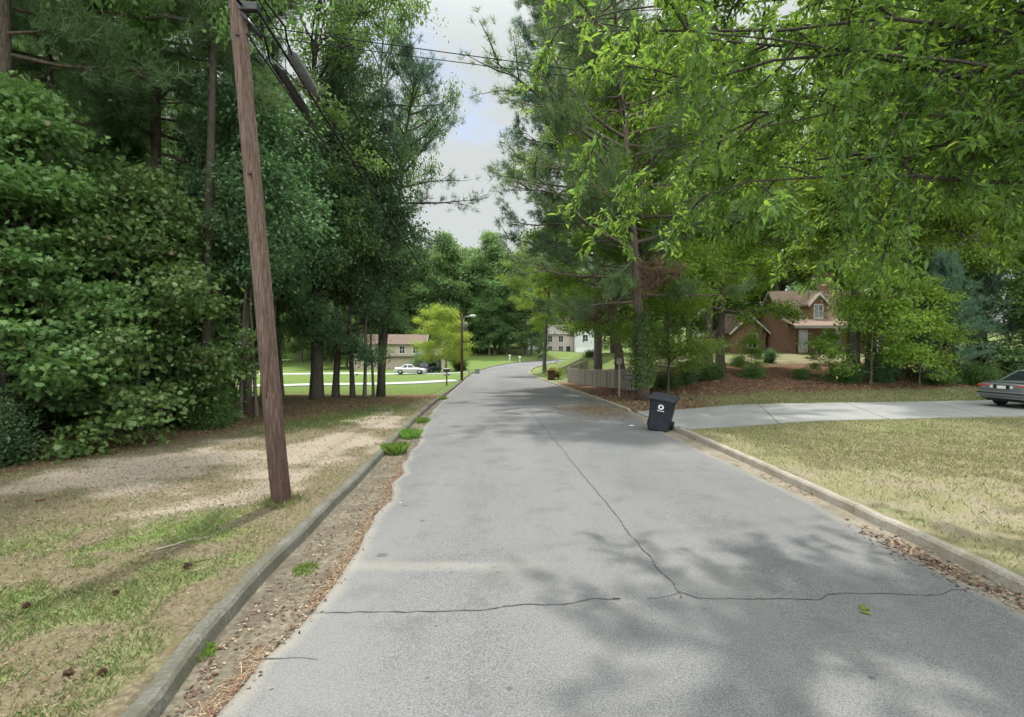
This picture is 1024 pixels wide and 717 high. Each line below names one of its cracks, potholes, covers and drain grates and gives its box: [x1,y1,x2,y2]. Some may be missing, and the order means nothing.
crack [299,598,621,613]
